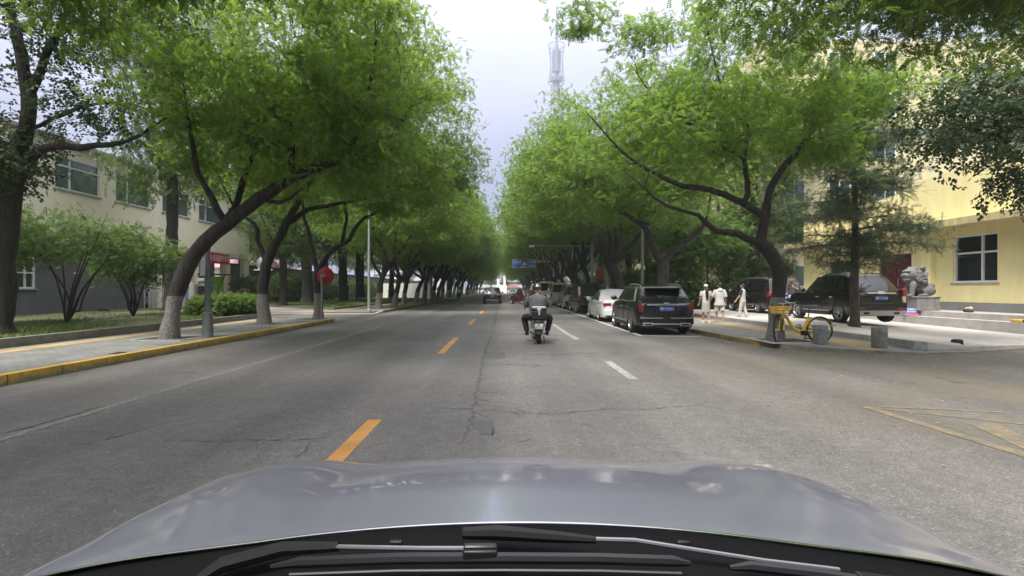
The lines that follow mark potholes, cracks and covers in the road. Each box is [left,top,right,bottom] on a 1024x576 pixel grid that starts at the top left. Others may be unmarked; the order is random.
crack [166,433,331,460]
crack [456,306,617,443]
crack [476,403,736,417]
